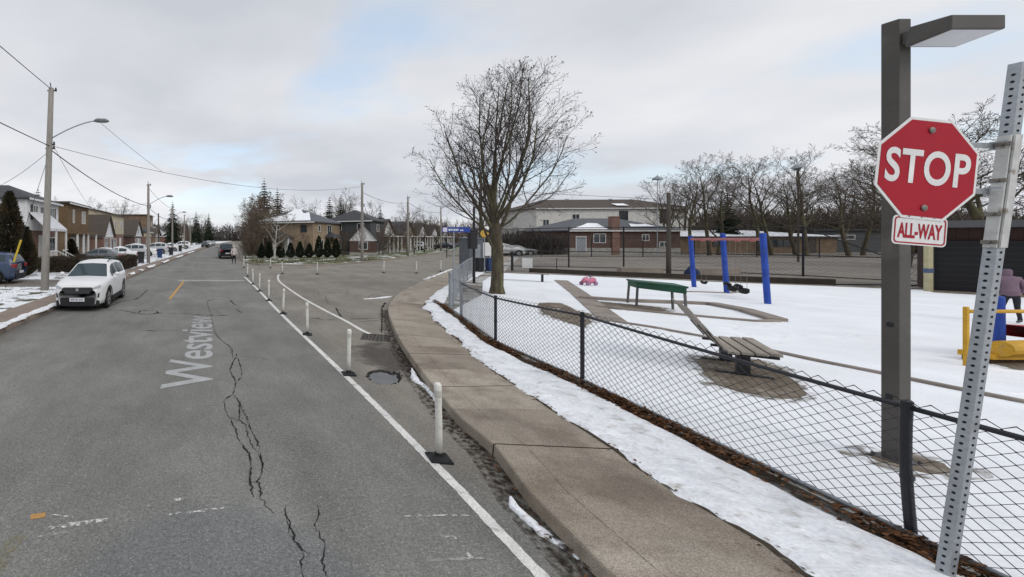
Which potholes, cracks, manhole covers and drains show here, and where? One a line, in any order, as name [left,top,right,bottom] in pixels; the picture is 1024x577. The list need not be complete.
drain grate [360,333,391,342]
crack [111,290,327,577]
